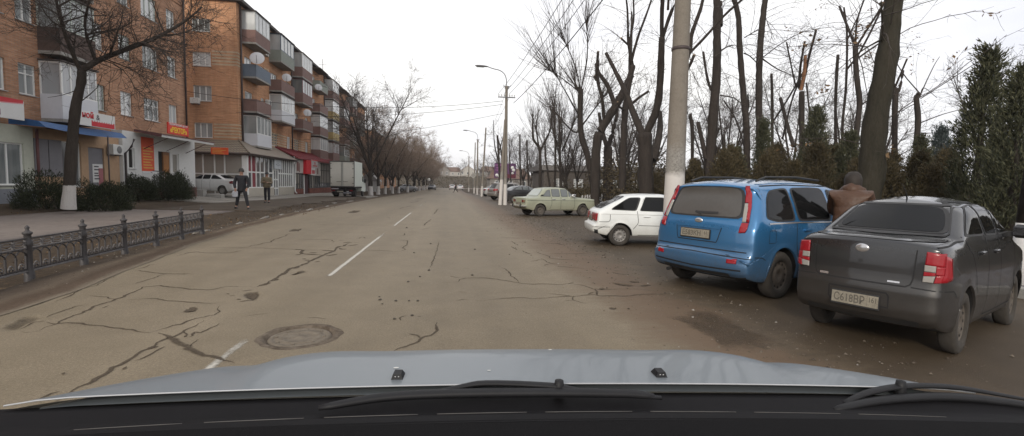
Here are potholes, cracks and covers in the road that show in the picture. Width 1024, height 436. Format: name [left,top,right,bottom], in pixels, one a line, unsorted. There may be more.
crack [394,316,439,351]
manhole cover [254,324,344,350]
crack [430,223,680,303]
crack [17,229,365,400]
